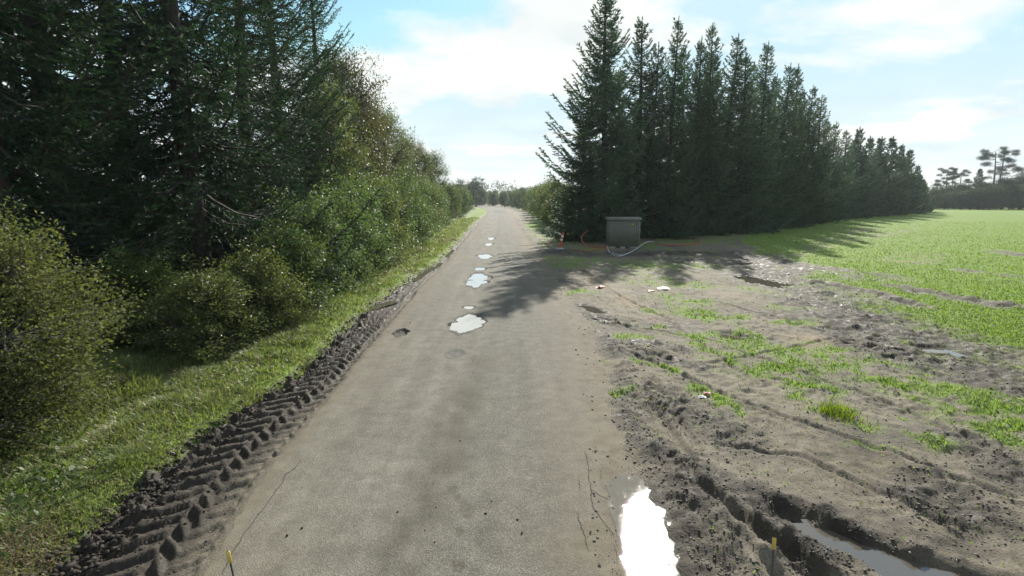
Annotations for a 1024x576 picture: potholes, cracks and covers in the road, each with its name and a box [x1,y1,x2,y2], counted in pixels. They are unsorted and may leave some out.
pothole [391,328,409,338]
pothole [448,312,487,336]
pothole [465,272,488,290]
crack [578,452,618,564]
crack [222,459,302,573]
